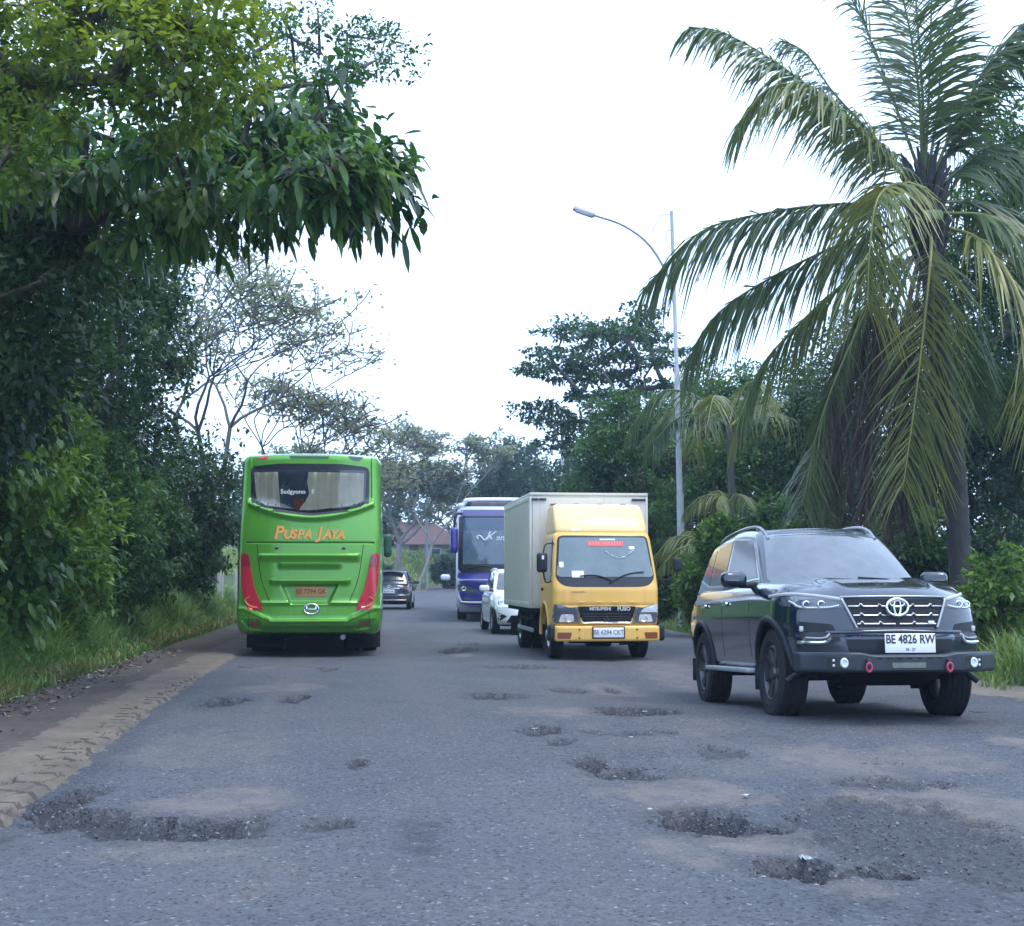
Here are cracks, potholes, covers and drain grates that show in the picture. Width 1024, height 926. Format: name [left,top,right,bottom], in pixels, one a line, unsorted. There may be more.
pothole [546,738,578,746]
pothole [813,774,964,792]
pothole [279,695,313,704]
pothole [467,693,532,701]
pothole [771,790,1024,893]
pothole [594,707,684,716]
pothole [691,745,752,760]
pothole [515,724,564,737]
pothole [19,787,282,843]
pothole [645,807,782,838]
pothole [567,757,665,781]
pothole [744,857,920,885]
